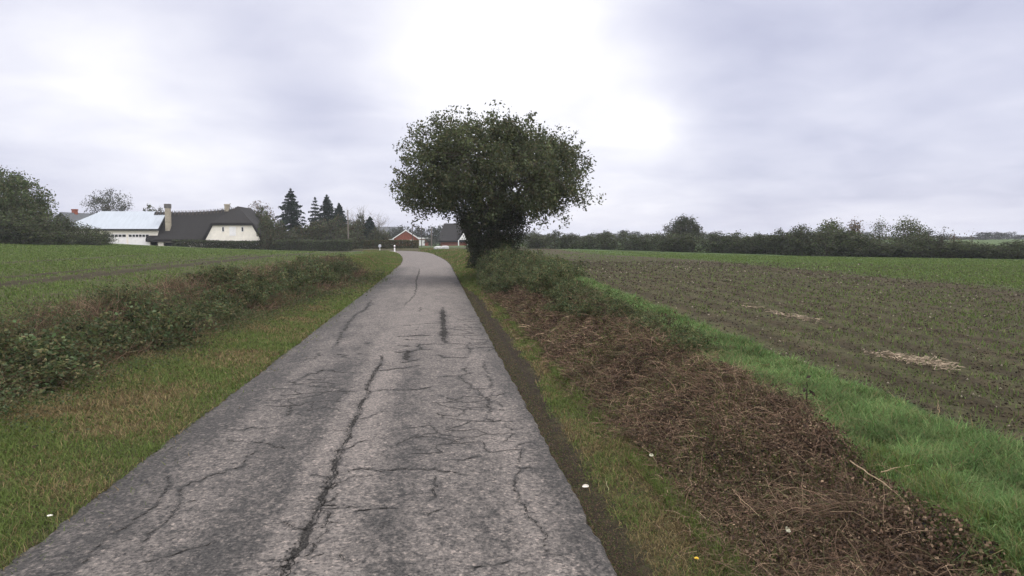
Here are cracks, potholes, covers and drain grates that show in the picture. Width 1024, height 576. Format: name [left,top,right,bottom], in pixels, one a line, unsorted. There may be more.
crack [265,300,560,576]
crack [69,427,285,572]
